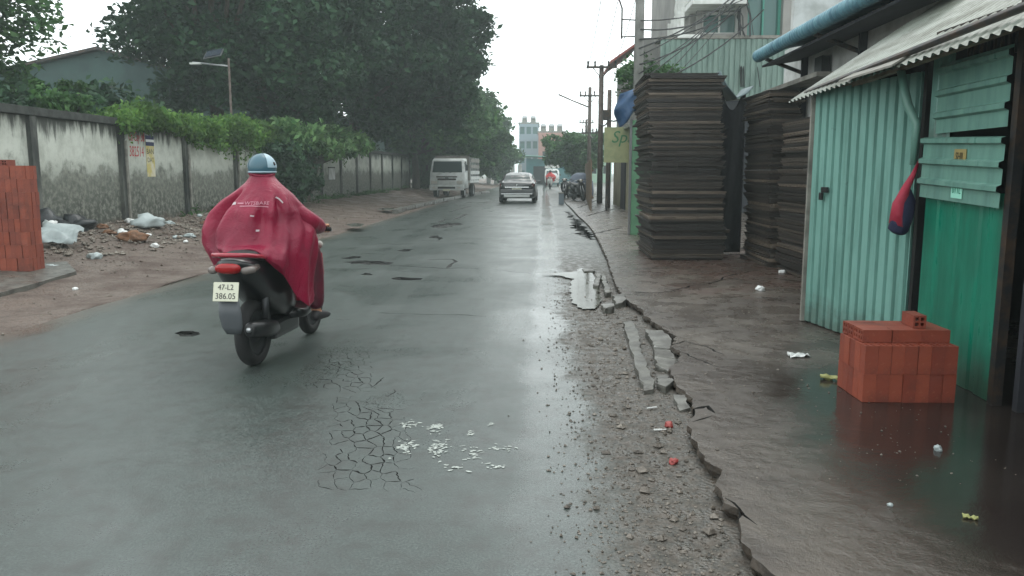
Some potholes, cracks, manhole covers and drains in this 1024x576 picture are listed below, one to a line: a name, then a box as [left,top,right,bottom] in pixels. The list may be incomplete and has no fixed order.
crack [638,271,749,293]
crack [725,498,757,525]
crack [693,406,715,422]
crack [313,351,420,493]
crack [670,341,722,367]
